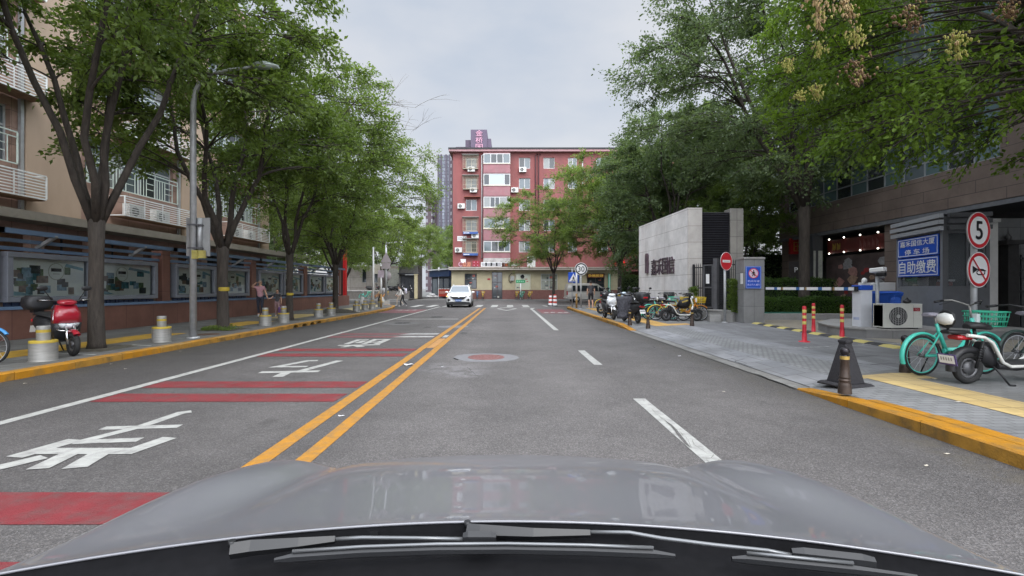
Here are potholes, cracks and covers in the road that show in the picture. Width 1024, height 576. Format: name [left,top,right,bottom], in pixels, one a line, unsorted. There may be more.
manhole cover [453,353,519,362]
